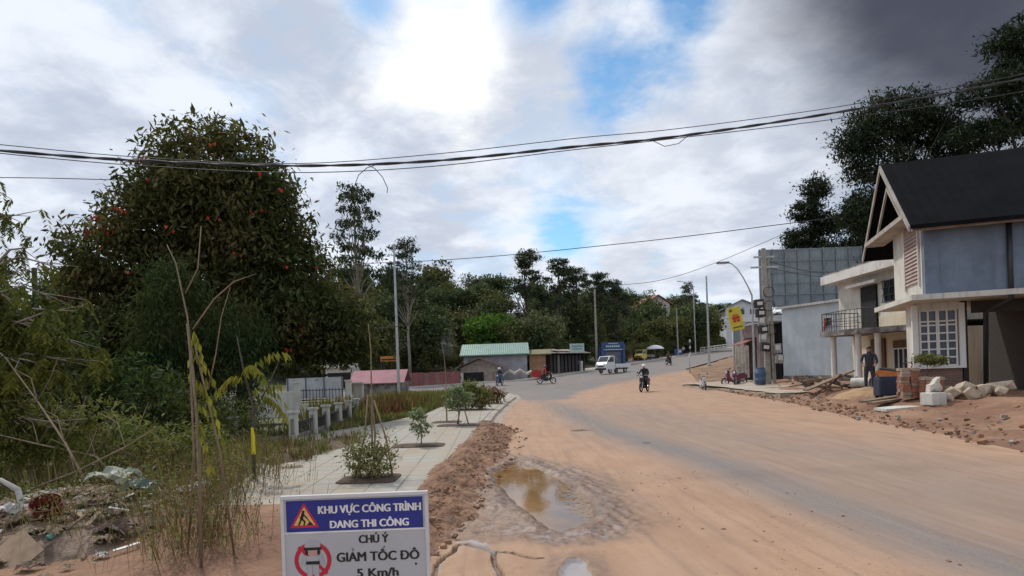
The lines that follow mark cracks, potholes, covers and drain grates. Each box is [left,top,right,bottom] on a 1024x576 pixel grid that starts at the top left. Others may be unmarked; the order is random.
pothole [556,556,596,576]
pothole [487,460,603,533]
